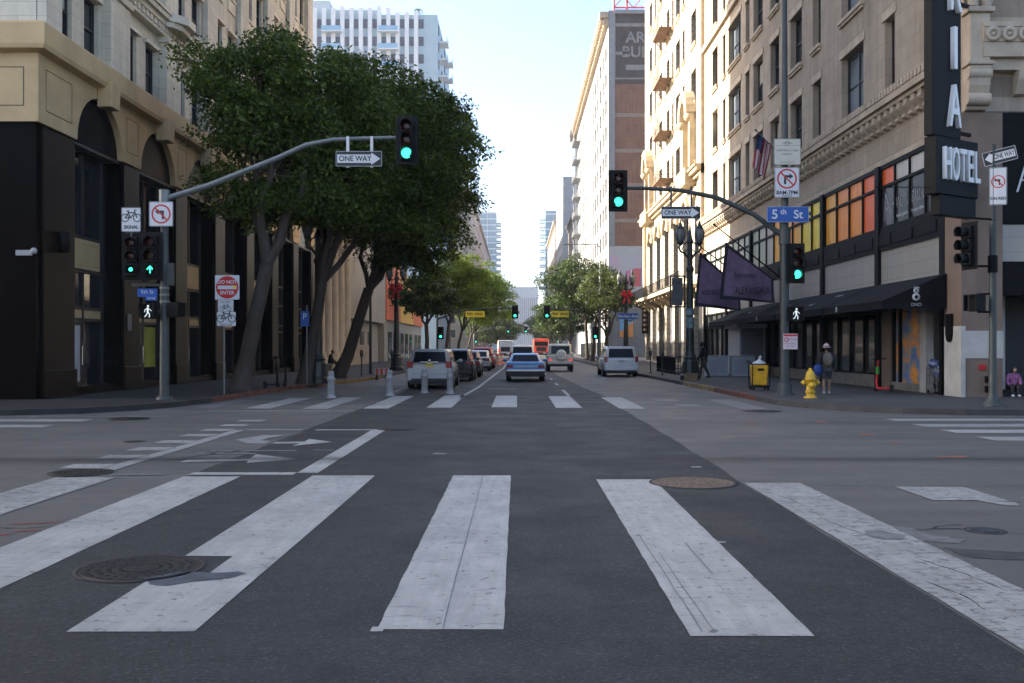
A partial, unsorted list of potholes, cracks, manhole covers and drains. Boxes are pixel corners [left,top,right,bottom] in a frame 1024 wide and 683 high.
manhole cover [964,527,1008,535]
crack [921,559,1007,610]
manhole cover [649,477,738,489]
manhole cover [72,554,206,583]
manhole cover [46,468,114,476]
